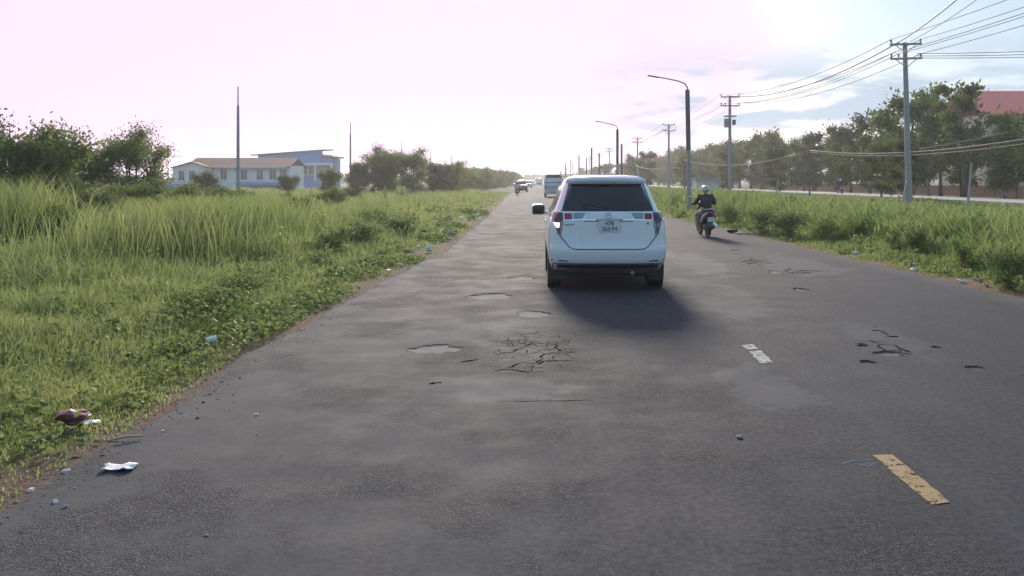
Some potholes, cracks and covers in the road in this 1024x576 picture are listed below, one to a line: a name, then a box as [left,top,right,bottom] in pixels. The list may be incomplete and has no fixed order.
pothole [406,344,464,353]
pothole [516,310,553,318]
crack [498,333,577,372]
crack [858,326,911,357]
